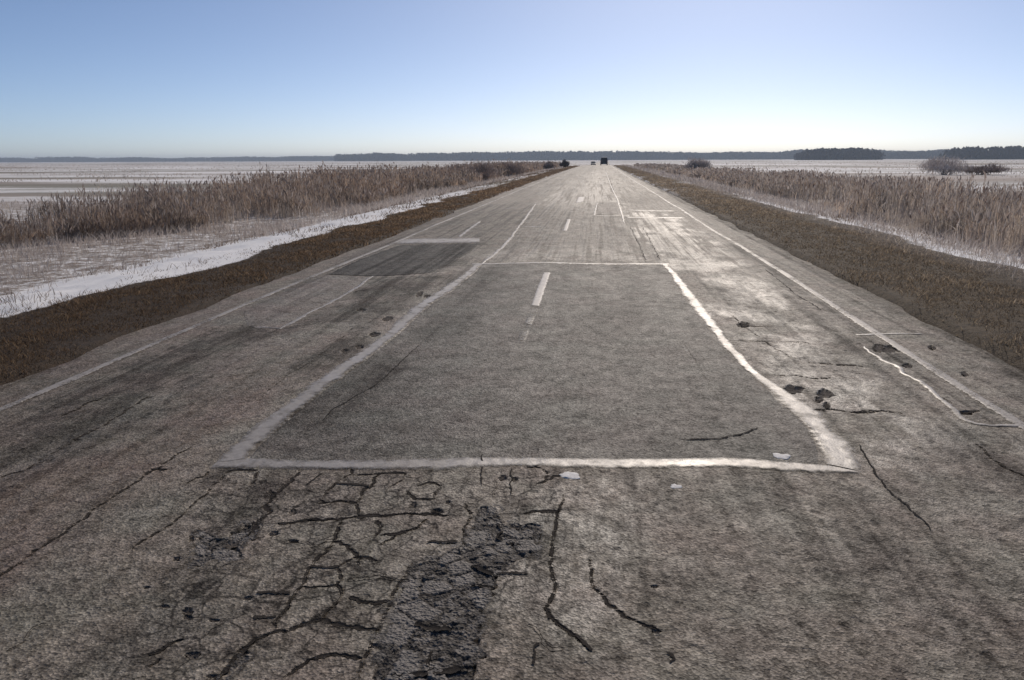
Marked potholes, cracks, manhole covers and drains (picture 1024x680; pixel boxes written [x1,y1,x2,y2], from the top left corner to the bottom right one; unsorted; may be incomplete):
crack [324,347,417,419]
crack [680,427,758,440]
crack [0,449,528,680]
crack [859,444,931,529]
crack [480,454,661,664]
